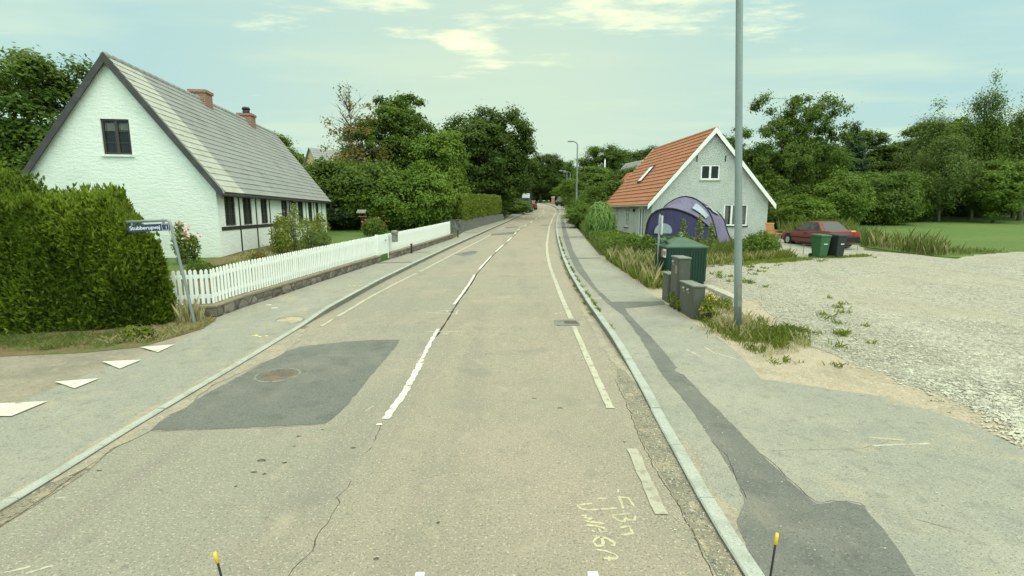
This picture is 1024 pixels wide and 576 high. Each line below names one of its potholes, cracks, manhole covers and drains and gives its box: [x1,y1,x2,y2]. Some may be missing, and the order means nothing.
manhole cover [253,368,301,383]
manhole cover [274,316,305,324]
crack [288,422,383,576]
